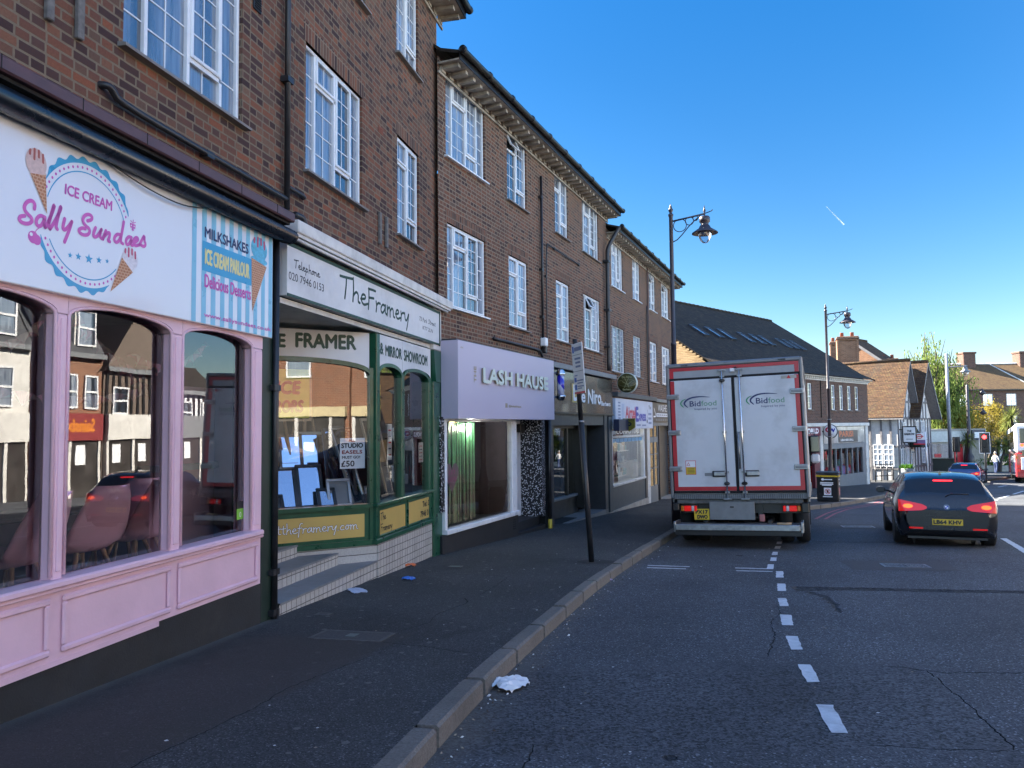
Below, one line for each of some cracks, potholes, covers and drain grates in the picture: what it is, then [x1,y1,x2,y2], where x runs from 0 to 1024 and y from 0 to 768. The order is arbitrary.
crack [862,666,1017,751]
crack [385,572,510,653]
crack [767,586,1024,656]
manhole cover [307,629,396,642]
